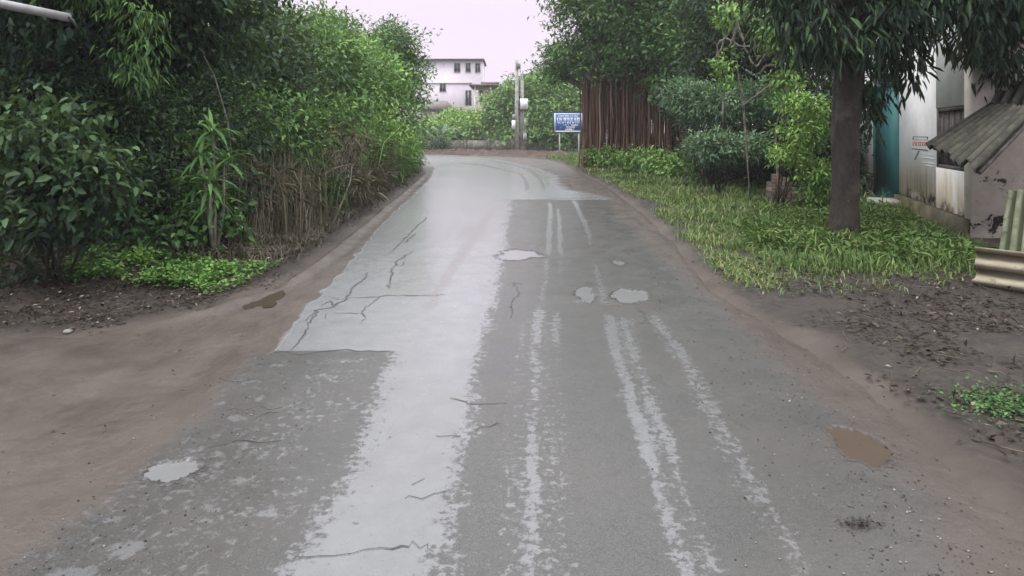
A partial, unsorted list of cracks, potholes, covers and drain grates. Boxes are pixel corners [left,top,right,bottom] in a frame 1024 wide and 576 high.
pothole [492,248,546,261]
pothole [607,287,652,304]
crack [278,217,441,363]
pothole [821,422,904,471]
pothole [135,456,209,486]
crack [287,541,432,557]
pothole [571,285,598,304]
